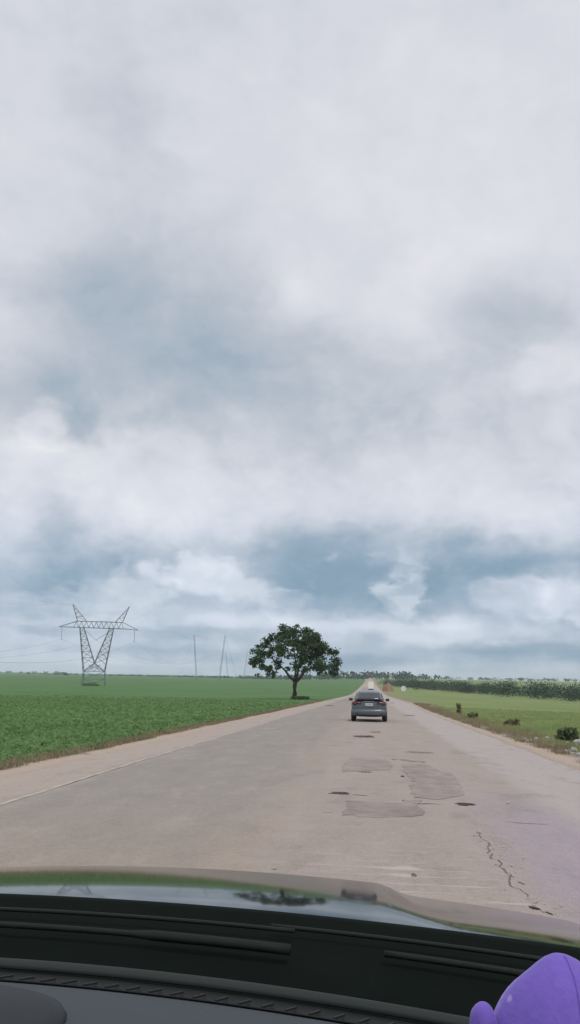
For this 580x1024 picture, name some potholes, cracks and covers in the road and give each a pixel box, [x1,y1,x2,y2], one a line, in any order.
crack [479,835,535,901]
